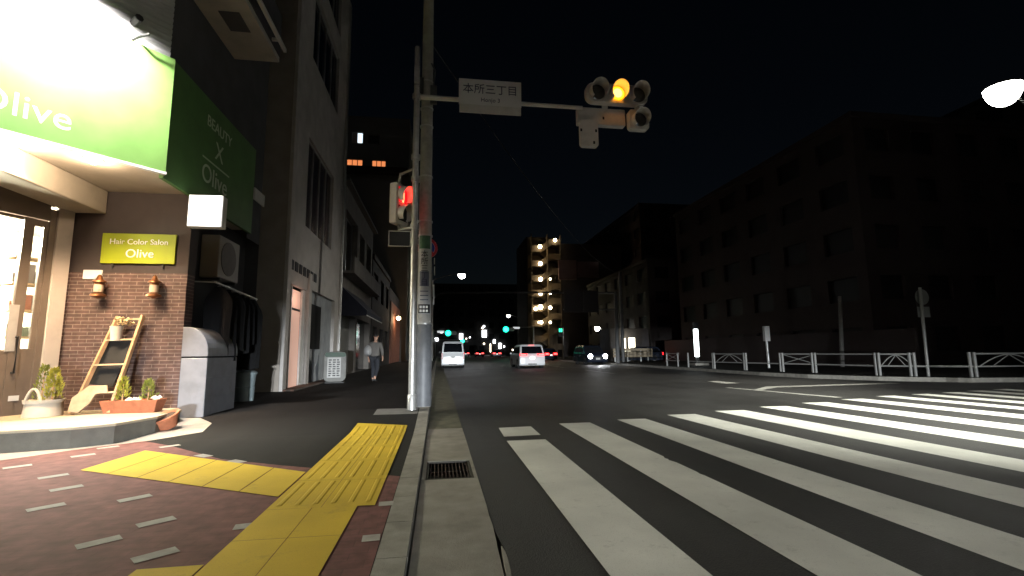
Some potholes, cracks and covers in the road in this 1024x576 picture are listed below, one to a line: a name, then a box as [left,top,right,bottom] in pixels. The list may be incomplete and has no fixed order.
drain grate [425,460,474,480]
